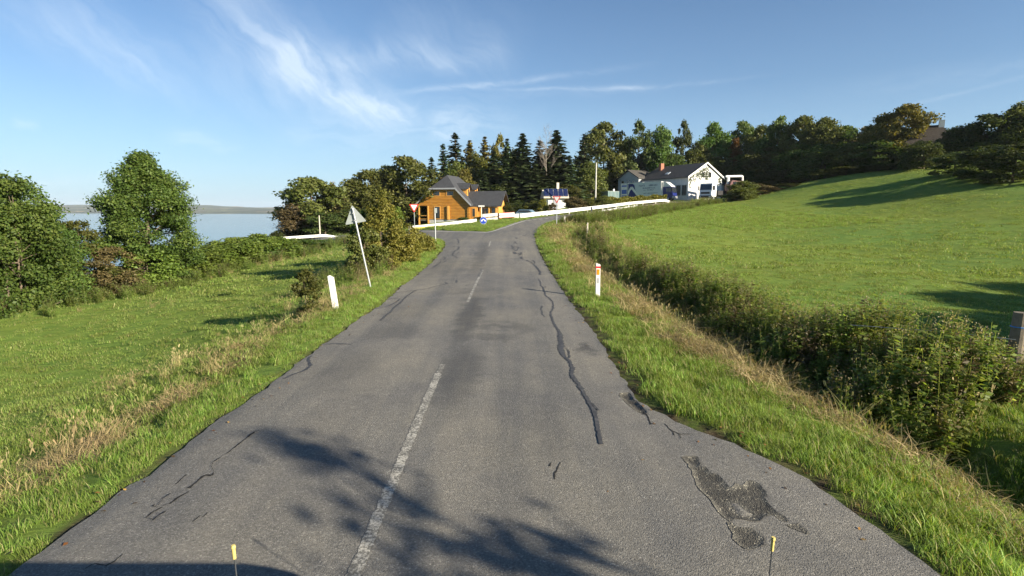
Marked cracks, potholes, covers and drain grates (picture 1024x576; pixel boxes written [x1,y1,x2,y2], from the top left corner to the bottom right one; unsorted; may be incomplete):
pothole [681,456,789,522]
pothole [727,521,764,549]
pothole [785,523,809,534]
crack [146,430,258,522]
